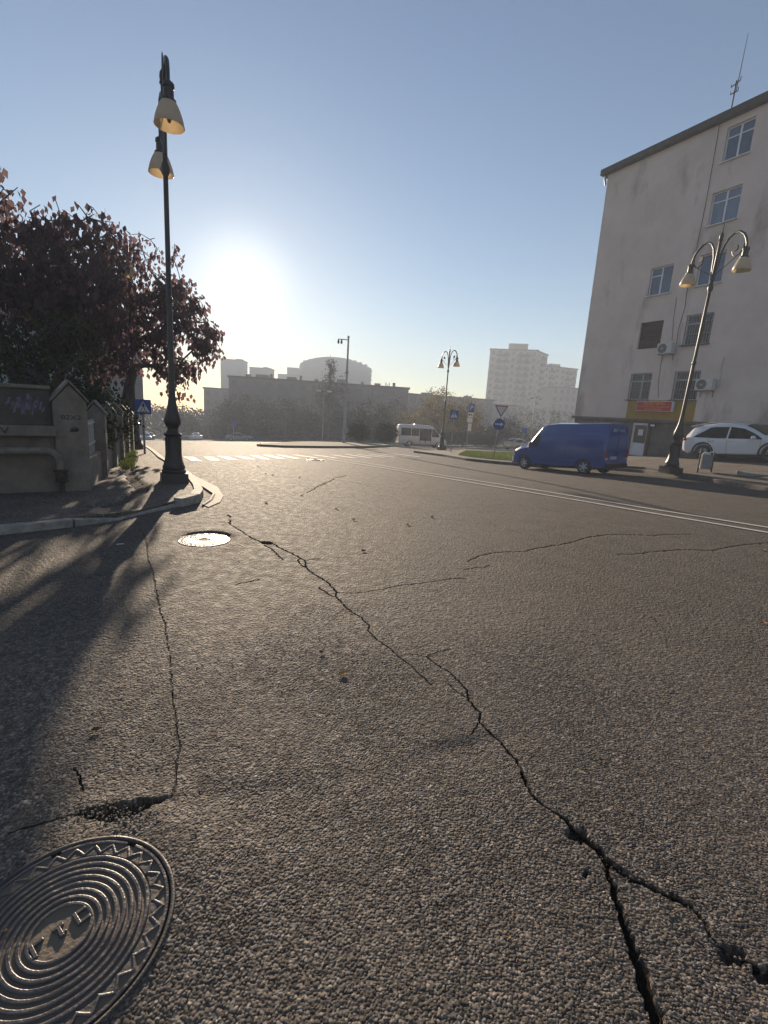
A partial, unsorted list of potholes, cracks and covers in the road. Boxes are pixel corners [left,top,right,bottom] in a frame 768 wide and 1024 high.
manhole cover [178,534,230,547]
crack [229,517,760,1024]
manhole cover [0,836,176,1024]
